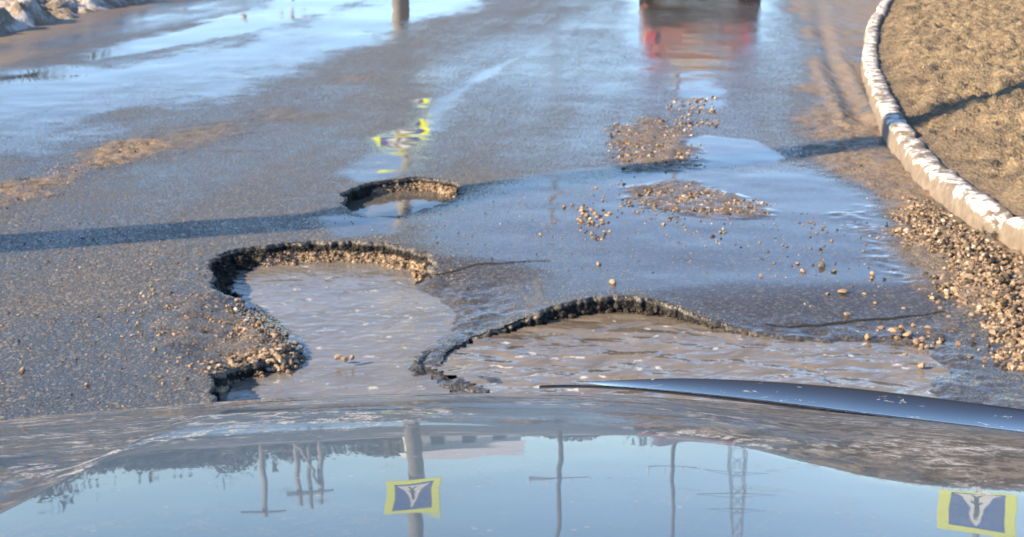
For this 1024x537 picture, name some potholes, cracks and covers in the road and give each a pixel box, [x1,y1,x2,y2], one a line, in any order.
crack [762,310,945,327]
crack [432,260,548,275]
